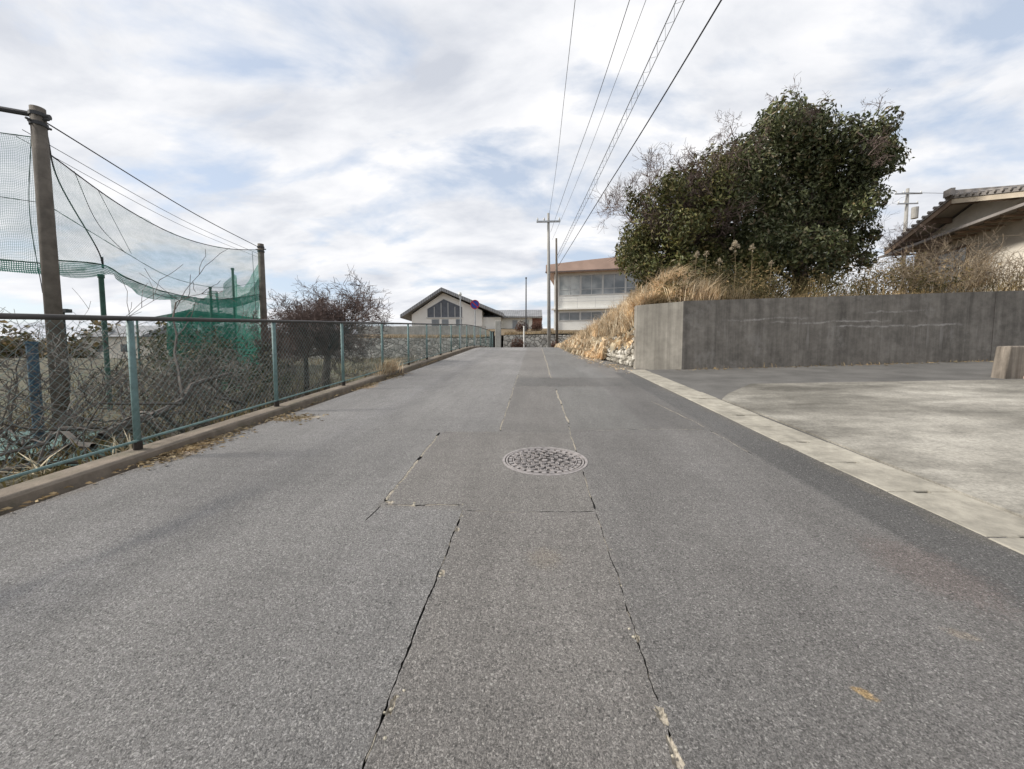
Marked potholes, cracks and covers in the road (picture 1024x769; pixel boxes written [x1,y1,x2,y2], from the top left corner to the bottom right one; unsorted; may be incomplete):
crack [362,349,685,769]
manhole cover [502,447,588,476]
